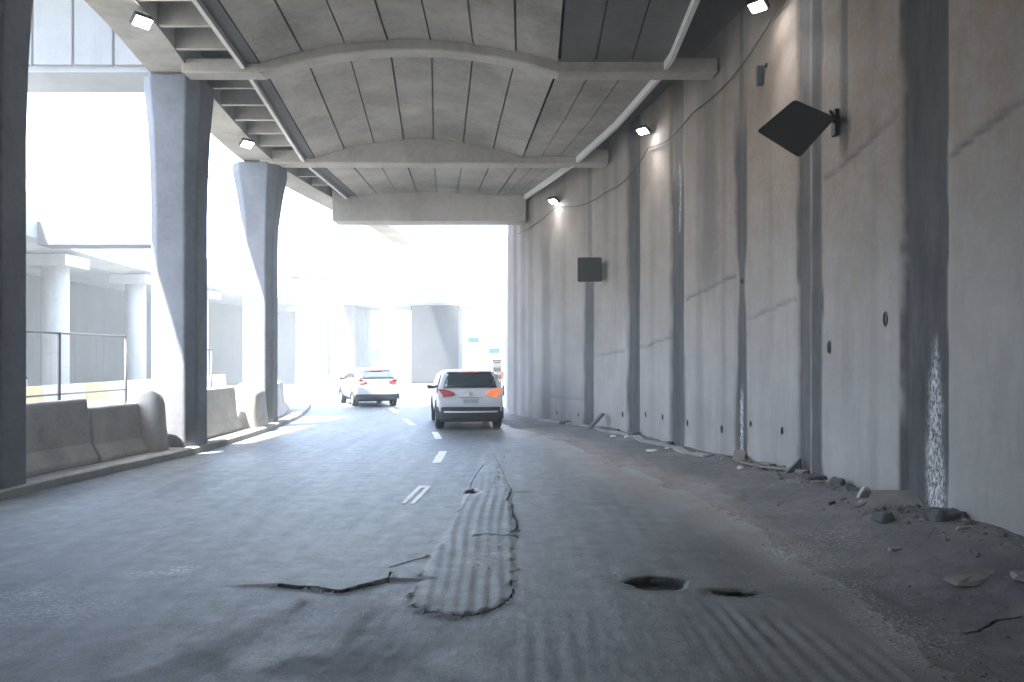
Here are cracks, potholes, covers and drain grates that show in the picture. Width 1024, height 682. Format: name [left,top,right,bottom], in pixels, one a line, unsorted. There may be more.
pothole [695,587,778,597]
pothole [615,574,693,592]
crack [961,612,1024,636]
crack [275,555,520,620]
